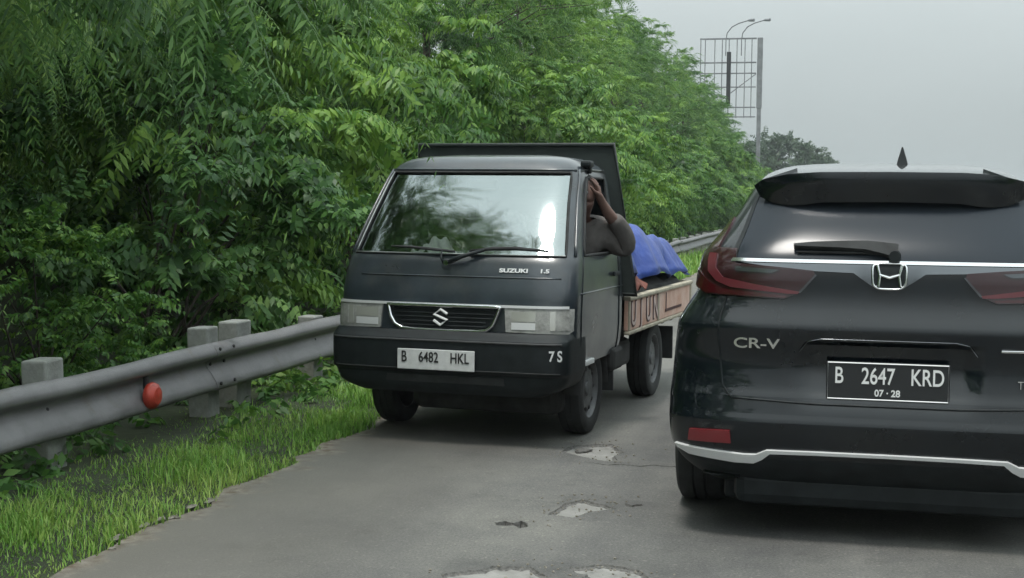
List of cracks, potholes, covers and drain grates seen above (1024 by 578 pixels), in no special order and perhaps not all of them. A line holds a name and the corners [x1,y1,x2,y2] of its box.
pothole [570,564,649,578]
pothole [548,499,616,518]
pothole [563,444,625,461]
pothole [441,566,548,578]
